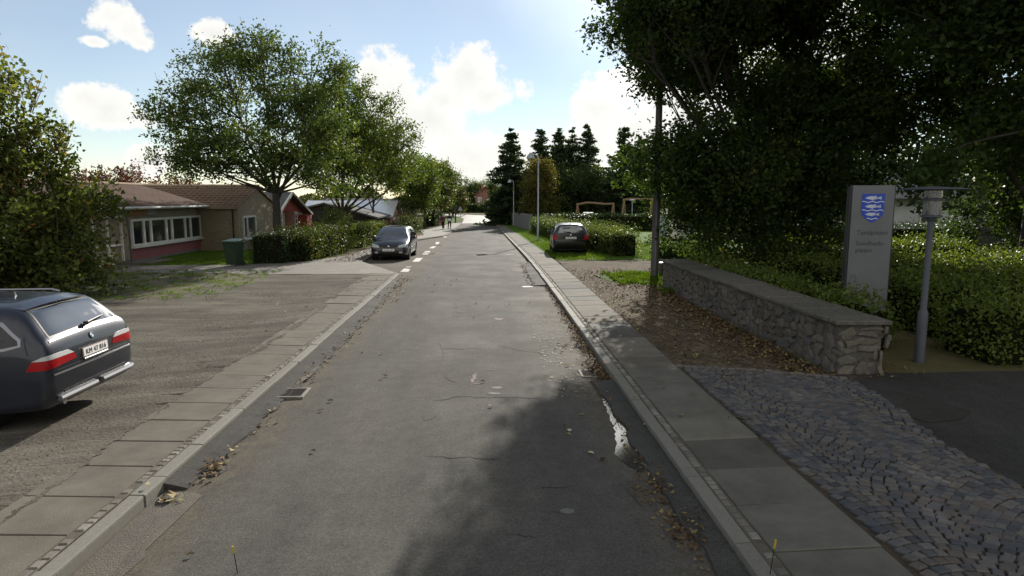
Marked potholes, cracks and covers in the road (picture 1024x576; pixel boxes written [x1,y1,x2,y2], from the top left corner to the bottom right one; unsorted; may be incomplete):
crack [422,343,540,421]
drain grate [277,387,311,400]
